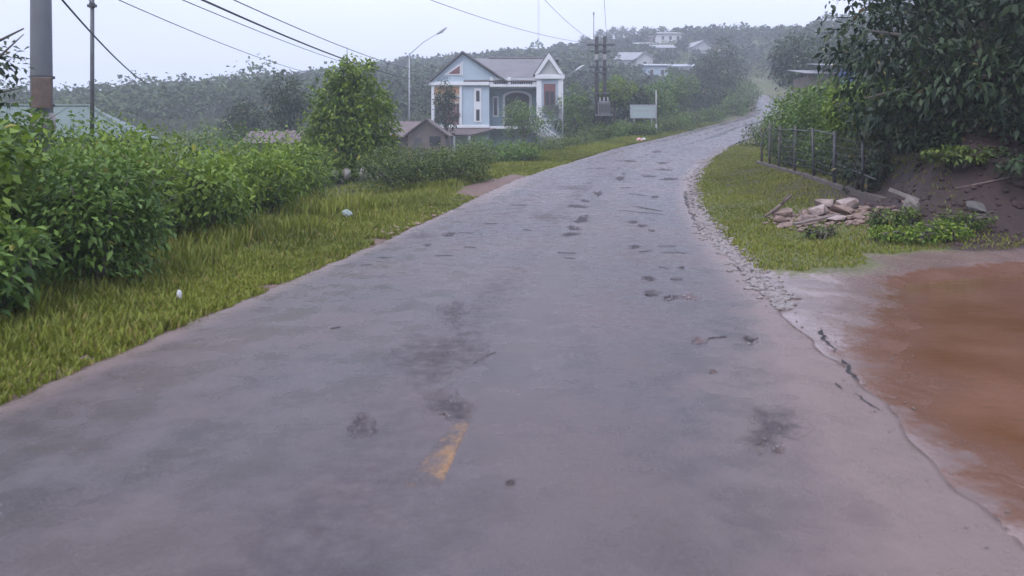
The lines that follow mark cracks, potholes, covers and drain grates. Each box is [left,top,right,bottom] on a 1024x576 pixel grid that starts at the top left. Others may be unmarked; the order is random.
pothole [643,289,663,297]
pothole [742,335,759,346]
pothole [422,386,478,423]
pothole [568,214,591,224]
pothole [347,412,378,440]
